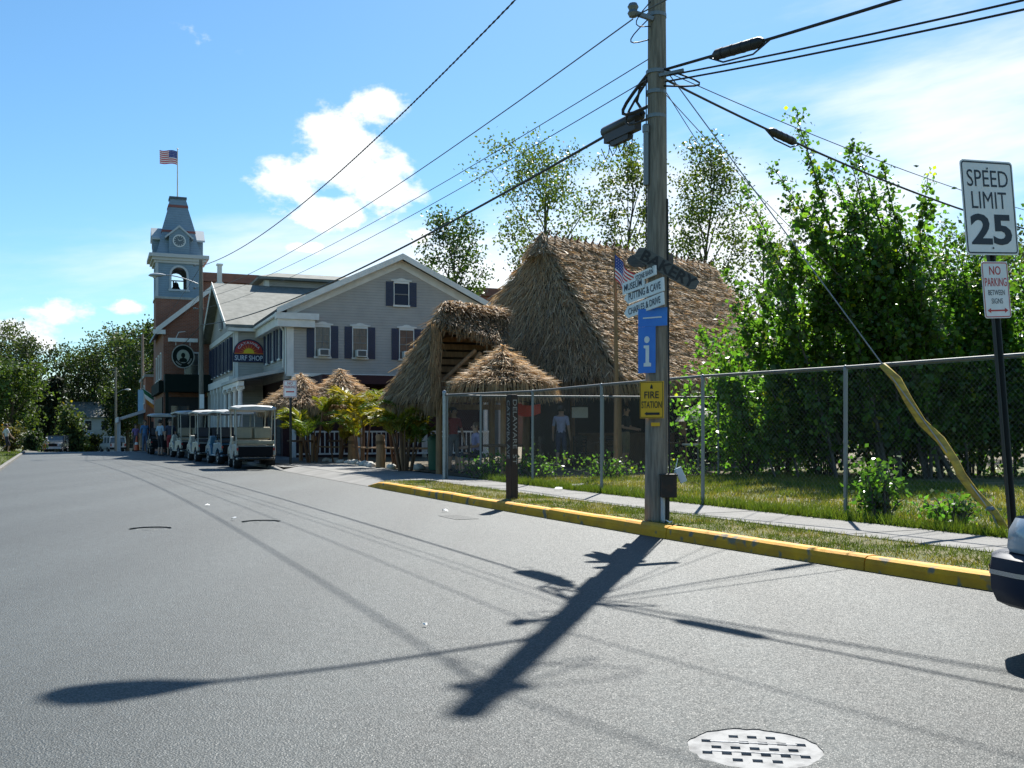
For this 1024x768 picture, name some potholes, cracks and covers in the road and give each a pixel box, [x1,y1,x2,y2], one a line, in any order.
manhole cover [687,729,824,768]
